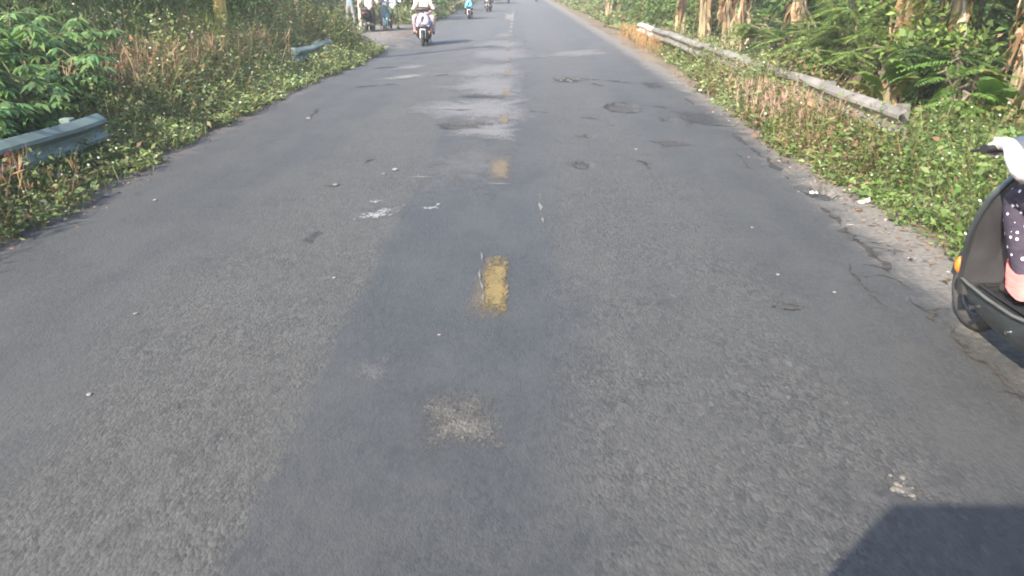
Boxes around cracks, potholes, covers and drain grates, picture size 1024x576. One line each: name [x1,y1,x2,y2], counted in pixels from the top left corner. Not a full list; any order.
pothole [773,301,803,310]
pothole [604,102,640,113]
crack [821,207,1024,401]
